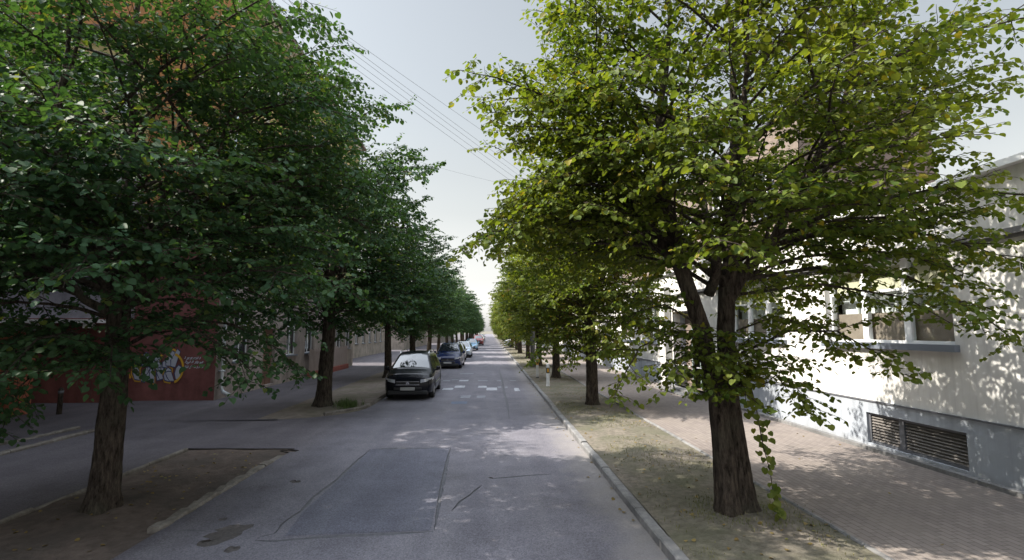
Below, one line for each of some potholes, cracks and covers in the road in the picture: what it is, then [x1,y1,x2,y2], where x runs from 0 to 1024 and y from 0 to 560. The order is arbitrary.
crack [451,474,546,511]
